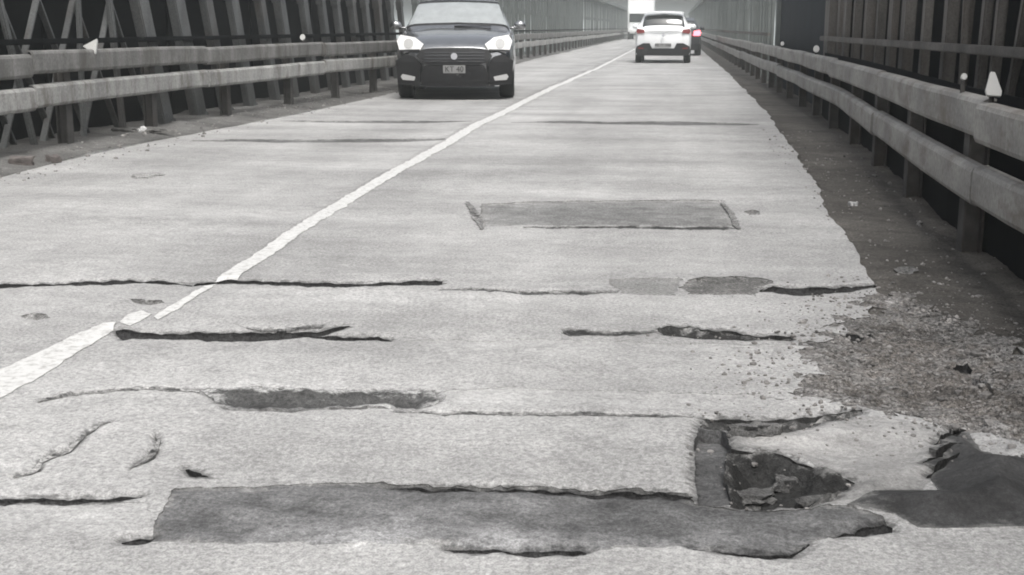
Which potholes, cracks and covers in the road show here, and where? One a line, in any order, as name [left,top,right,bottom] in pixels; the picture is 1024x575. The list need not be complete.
crack [38,386,199,401]
crack [0,279,617,295]
crack [116,324,392,342]
crack [760,285,876,296]
pothole [723,449,855,511]
crack [0,497,142,506]
pothole [201,387,439,412]
crack [563,328,658,336]
crack [13,422,108,477]
crack [130,434,160,469]
